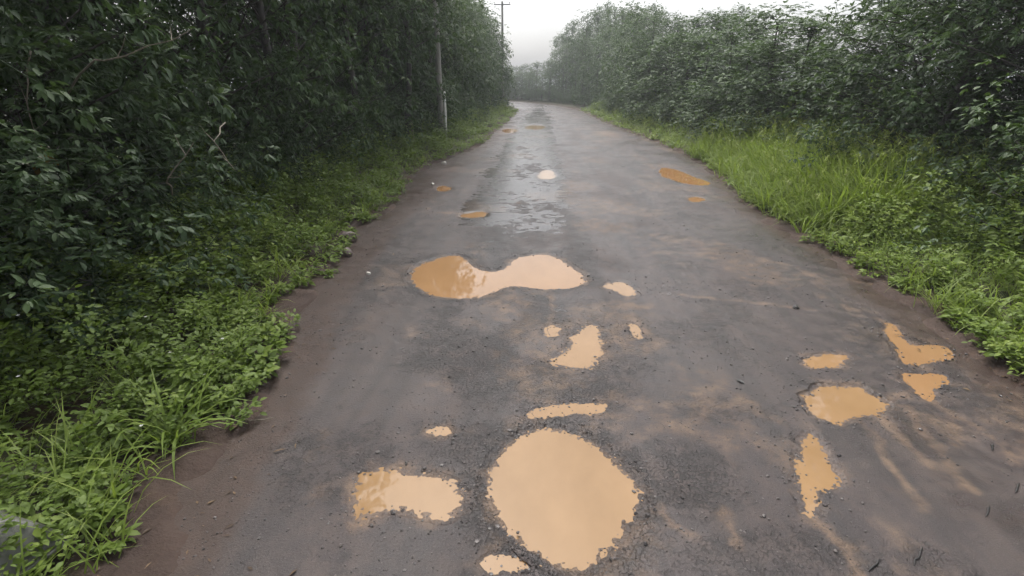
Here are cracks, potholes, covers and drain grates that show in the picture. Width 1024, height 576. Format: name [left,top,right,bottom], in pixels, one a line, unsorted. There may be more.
pothole [864,321,971,373]
pothole [597,279,642,298]
